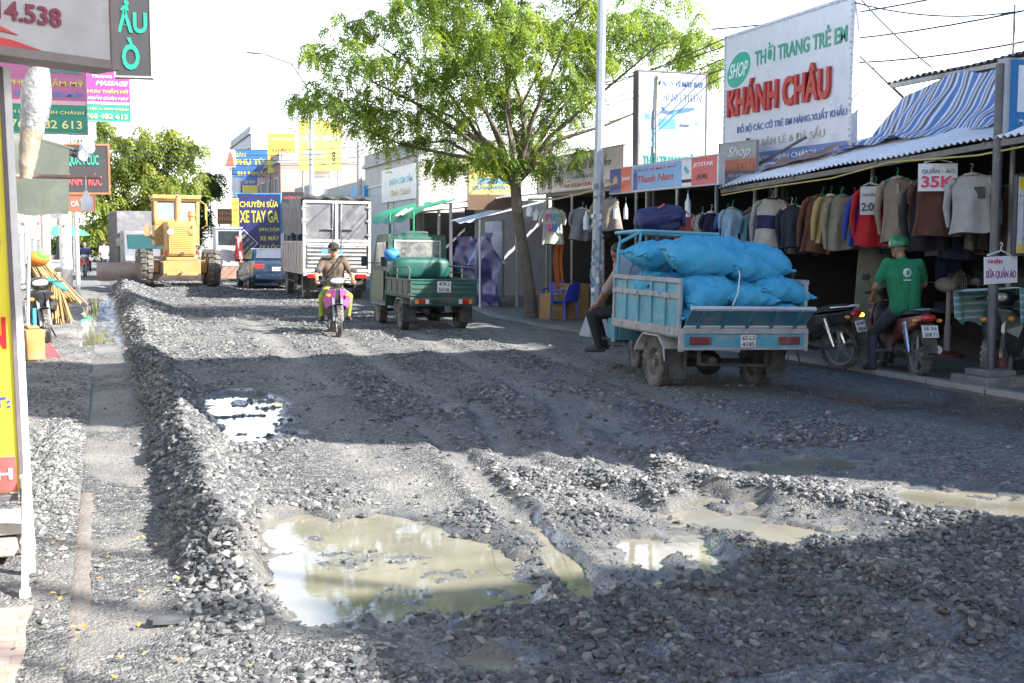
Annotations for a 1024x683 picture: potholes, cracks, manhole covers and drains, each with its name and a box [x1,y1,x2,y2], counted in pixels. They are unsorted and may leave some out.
pothole [879,478,1024,518]
pothole [198,387,312,444]
pothole [225,504,559,635]
pothole [642,478,884,546]
pothole [561,523,755,588]
pothole [717,447,901,477]
pothole [77,297,125,348]
